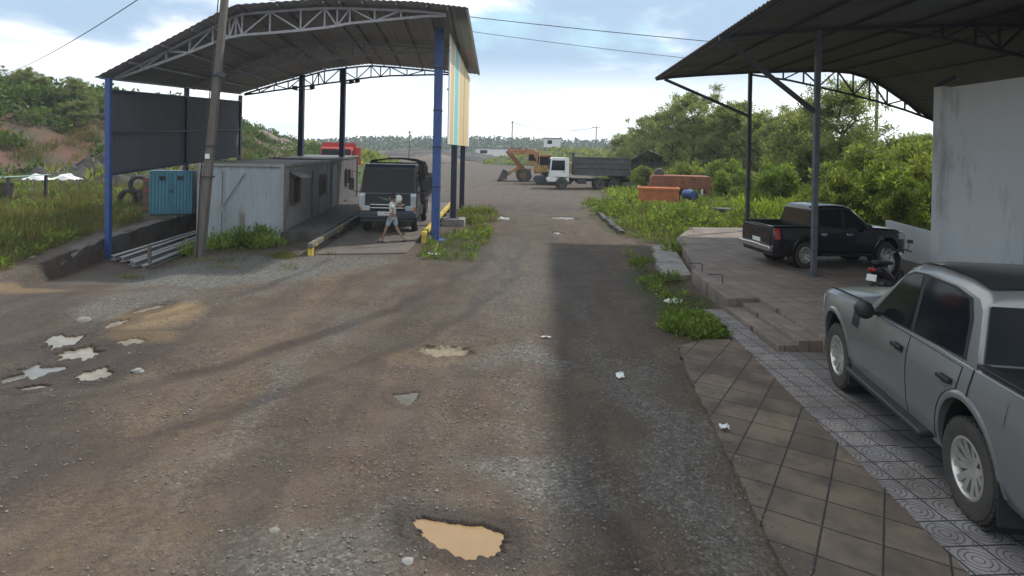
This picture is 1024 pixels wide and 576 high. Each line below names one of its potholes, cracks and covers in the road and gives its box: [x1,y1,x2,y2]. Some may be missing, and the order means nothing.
pothole [381,387,431,410]
pothole [0,380,68,395]
pothole [0,357,82,387]
pothole [404,343,487,361]
pothole [104,335,158,350]
pothole [39,341,117,368]
pothole [60,362,126,386]
pothole [27,331,96,355]
pothole [395,509,532,572]
pothole [91,316,139,331]
